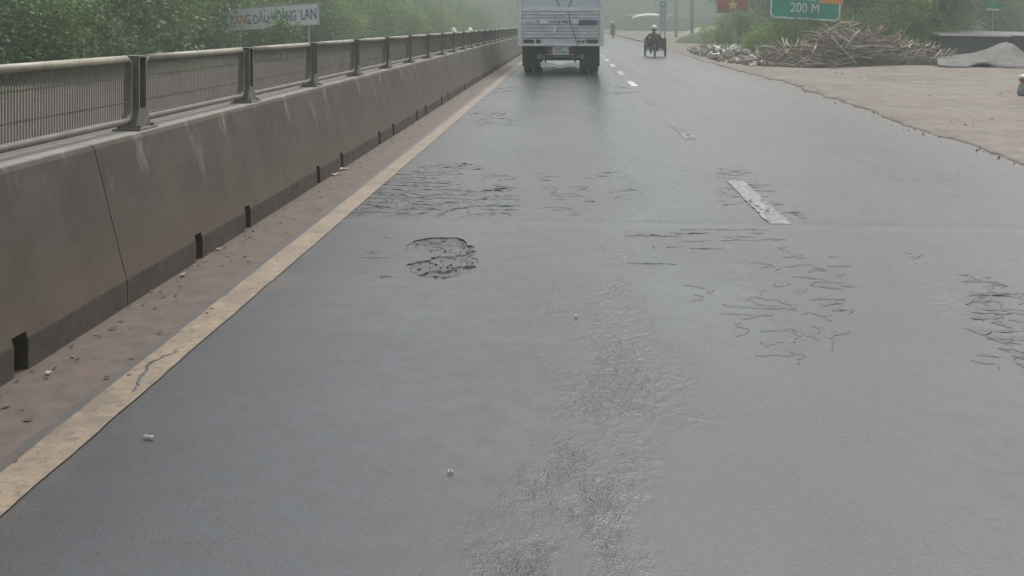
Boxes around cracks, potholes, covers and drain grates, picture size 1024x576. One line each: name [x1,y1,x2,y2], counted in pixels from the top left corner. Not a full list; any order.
pothole [405,237,478,279]
crack [624,167,855,365]
crack [132,350,178,392]
crack [338,162,637,224]
crack [956,274,1024,369]
